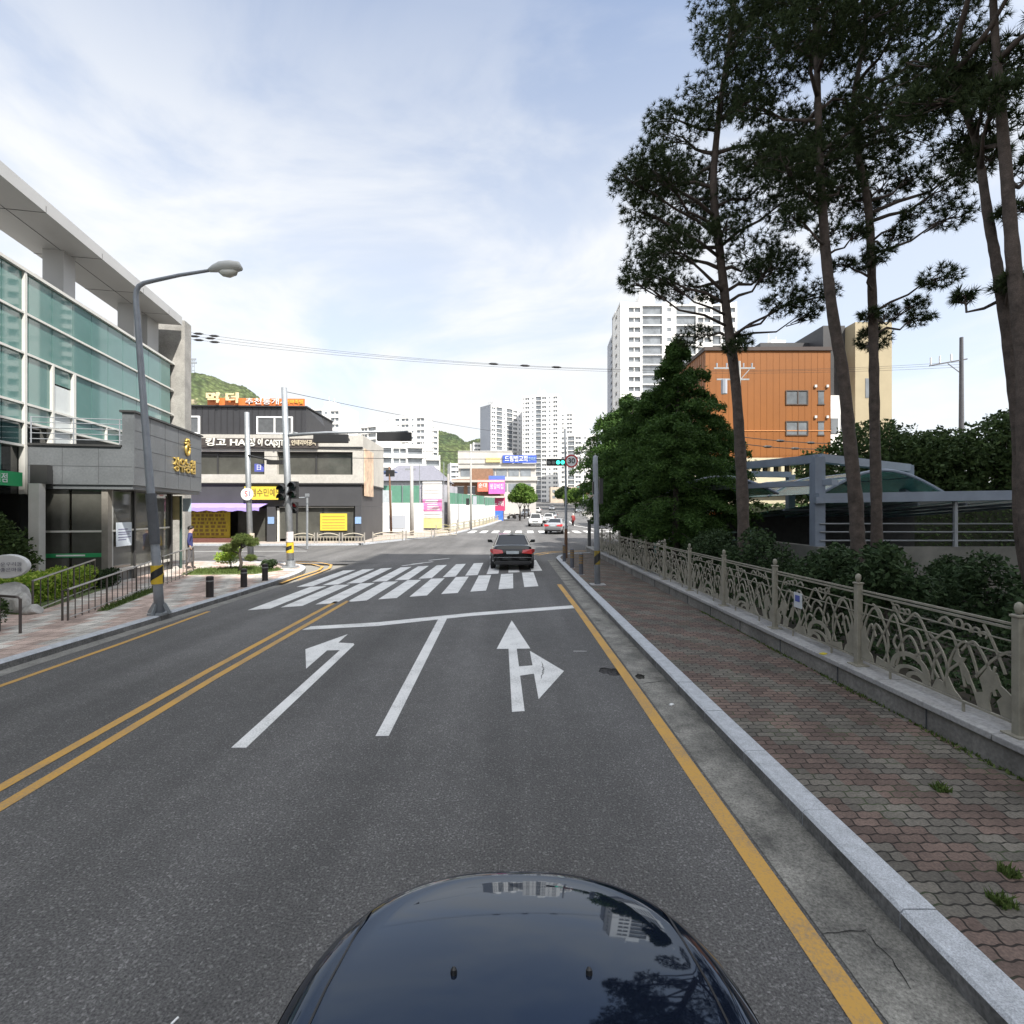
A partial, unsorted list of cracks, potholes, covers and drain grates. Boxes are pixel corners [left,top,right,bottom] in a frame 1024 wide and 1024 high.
pothole [599,668,620,676]
crack [823,929,910,988]
